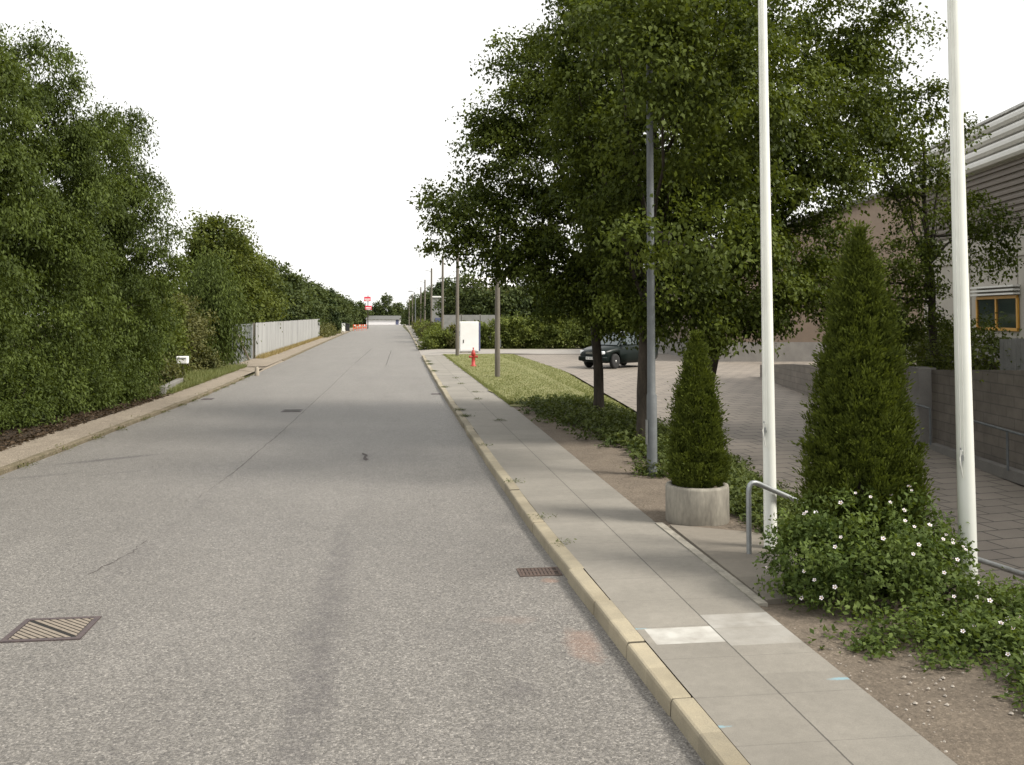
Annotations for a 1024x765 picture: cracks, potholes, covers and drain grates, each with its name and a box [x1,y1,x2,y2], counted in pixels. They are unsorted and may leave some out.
drain grate [516,567,563,577]
